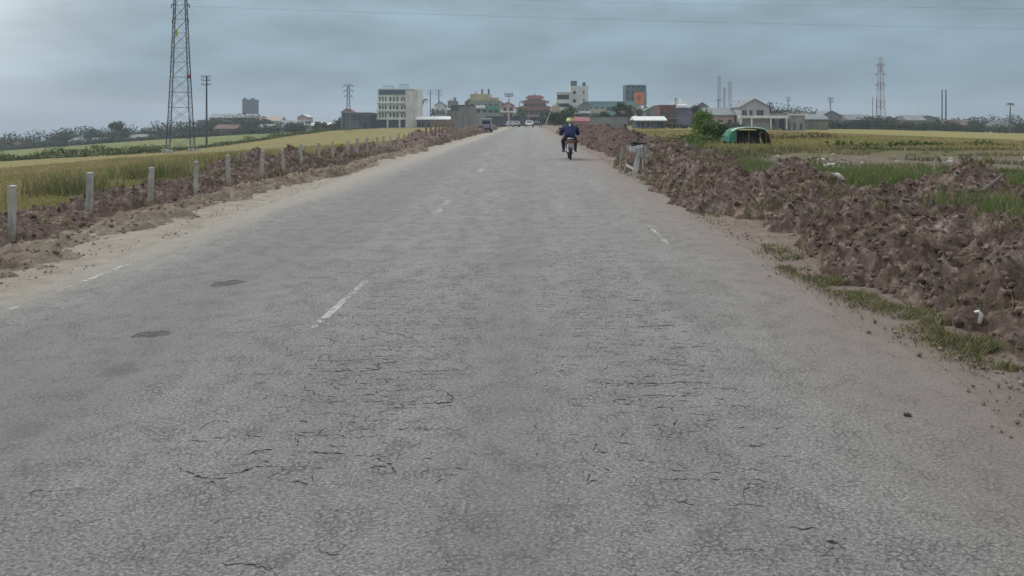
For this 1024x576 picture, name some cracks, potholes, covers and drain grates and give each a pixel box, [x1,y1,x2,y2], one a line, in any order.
crack [734,483,763,507]
crack [531,251,778,484]
crack [659,478,713,505]
crack [790,521,849,564]
crack [223,551,279,571]
crack [176,264,499,485]
